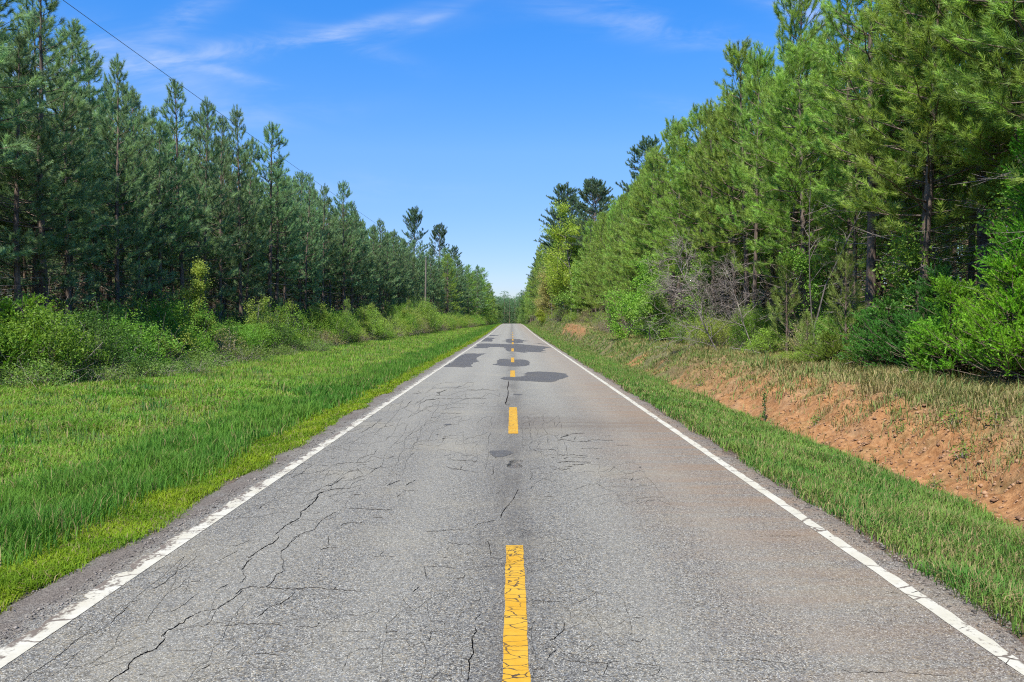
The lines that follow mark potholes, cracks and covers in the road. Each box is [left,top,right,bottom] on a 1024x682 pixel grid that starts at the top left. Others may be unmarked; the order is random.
crack [23,382,670,682]
